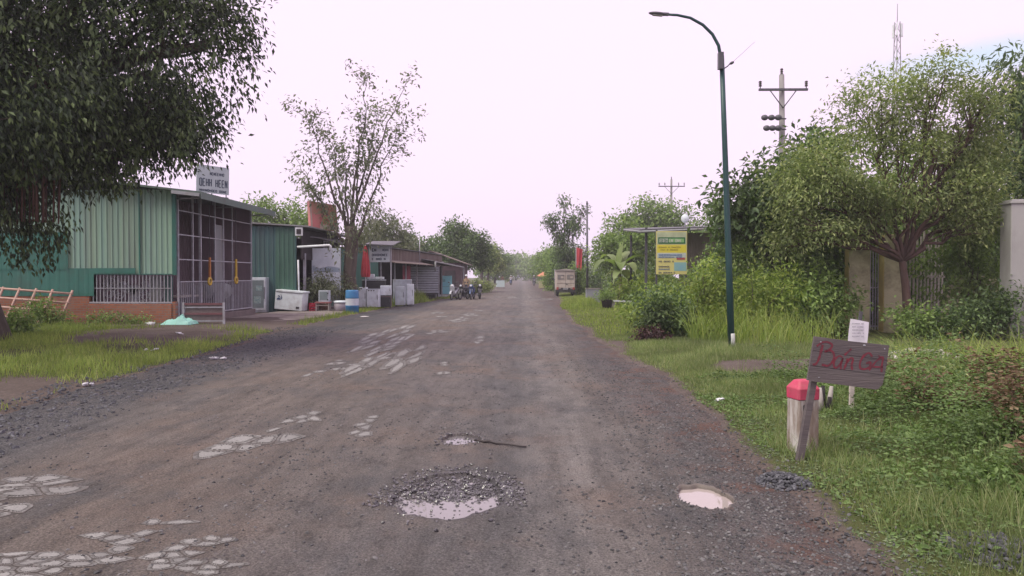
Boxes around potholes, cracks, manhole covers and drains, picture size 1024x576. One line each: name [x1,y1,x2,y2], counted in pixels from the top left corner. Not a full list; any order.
pothole [434,432,490,447]
pothole [660,481,749,514]
pothole [362,463,528,532]
